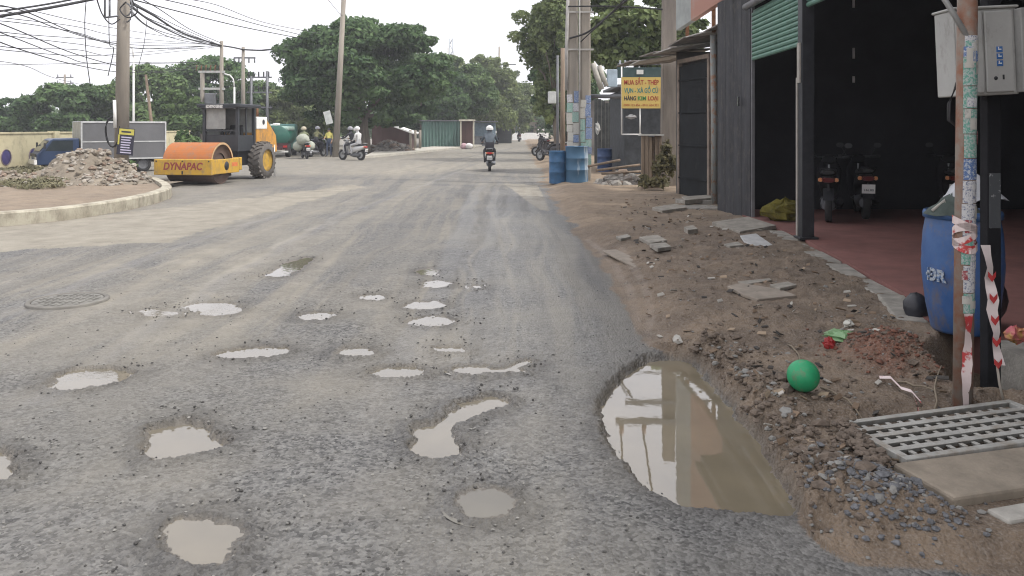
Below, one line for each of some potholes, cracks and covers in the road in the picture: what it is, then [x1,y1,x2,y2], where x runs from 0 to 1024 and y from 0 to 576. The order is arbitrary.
pothole [590,344,807,516]
pothole [297,311,339,320]
manhole cover [24,292,110,310]
pothole [401,299,449,310]
pothole [135,413,240,461]
pothole [444,357,534,377]
pothole [404,391,516,459]
drain grate [849,400,1024,463]
pothole [45,365,139,390]
pothole [129,308,186,318]
pothole [332,344,380,356]
